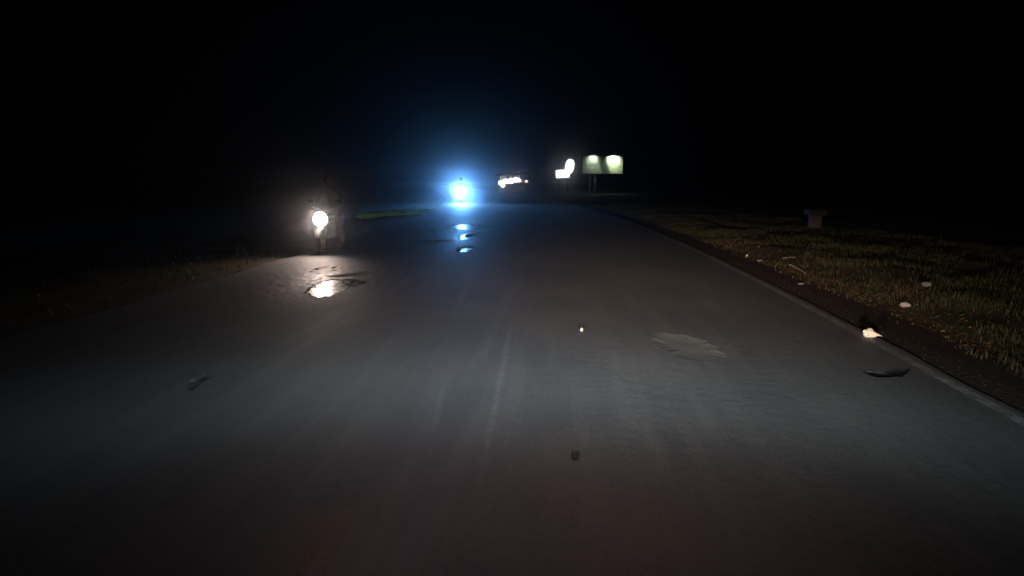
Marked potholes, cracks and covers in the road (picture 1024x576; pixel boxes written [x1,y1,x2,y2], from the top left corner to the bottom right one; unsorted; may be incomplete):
pothole [458,231,481,240]
pothole [303,279,369,298]
pothole [307,266,347,274]
